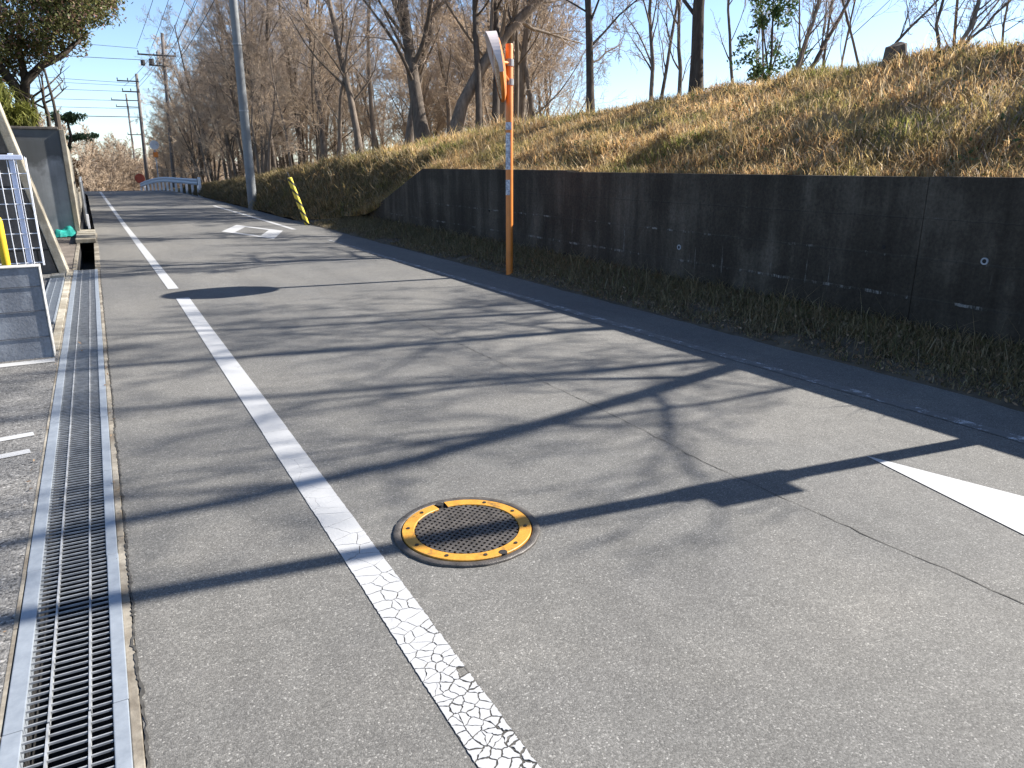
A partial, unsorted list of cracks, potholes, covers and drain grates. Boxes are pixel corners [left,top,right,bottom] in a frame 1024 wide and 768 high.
drain grate [73,269,98,279]
drain grate [2,553,129,742]
drain grate [50,378,108,427]
drain grate [0,699,134,768]
drain grate [67,298,101,315]
manhole cover [393,497,540,568]
drain grate [56,350,106,384]
drain grate [61,329,104,355]
drain grate [27,470,118,575]
